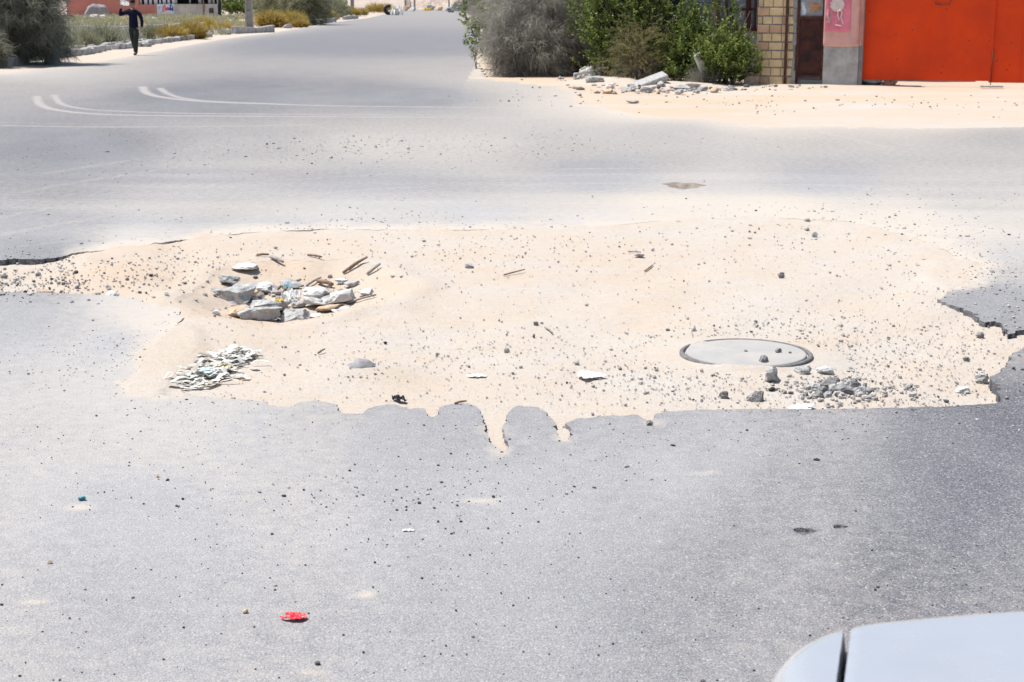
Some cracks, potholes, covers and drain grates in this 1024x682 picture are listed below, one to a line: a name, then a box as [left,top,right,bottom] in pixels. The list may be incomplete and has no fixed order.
manhole cover [679,338,813,367]
pothole [174,260,411,327]
